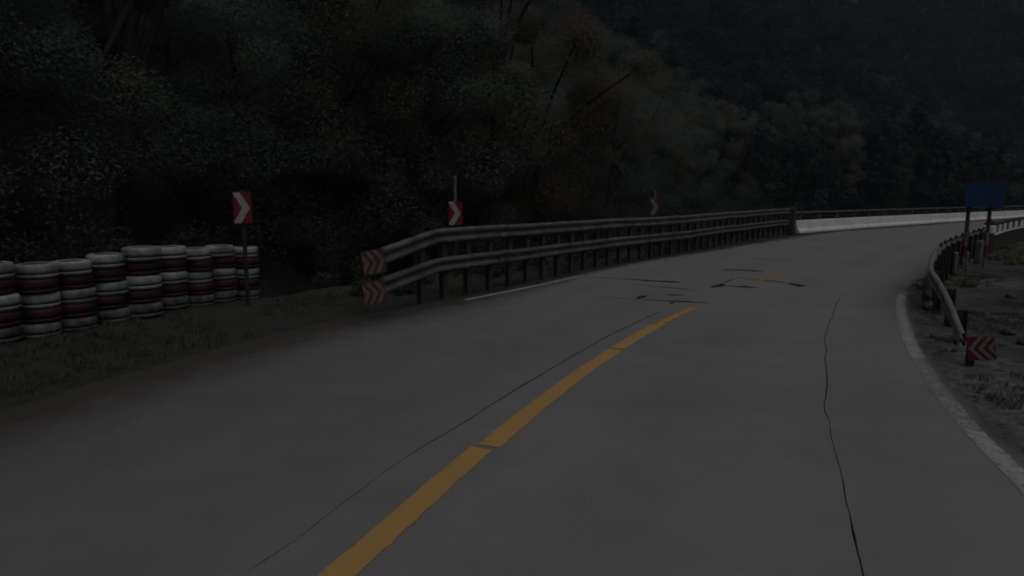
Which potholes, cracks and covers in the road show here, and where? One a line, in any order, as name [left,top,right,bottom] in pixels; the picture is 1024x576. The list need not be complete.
crack [255,277,707,567]
crack [824,298,864,576]
crack [720,258,788,288]
